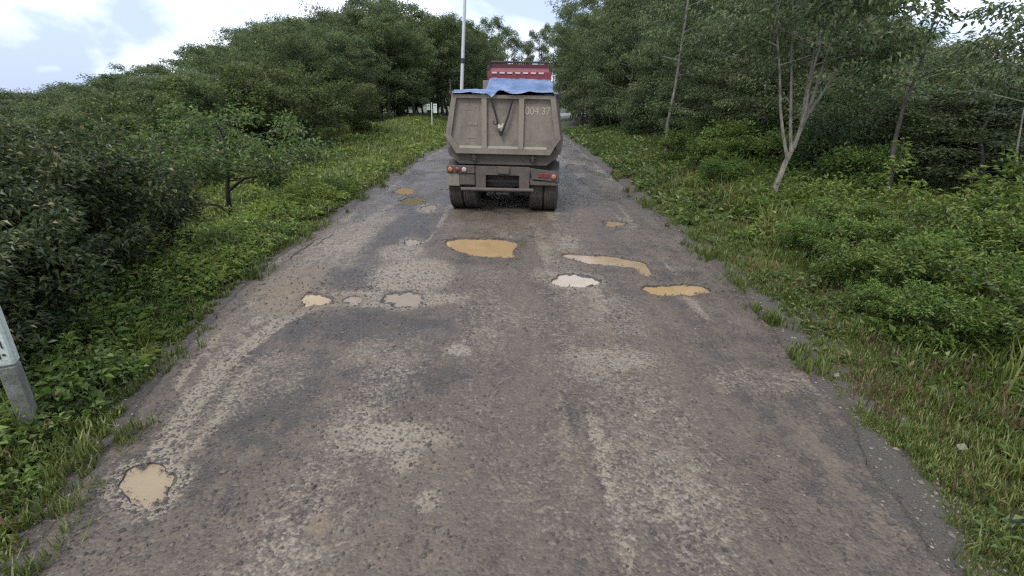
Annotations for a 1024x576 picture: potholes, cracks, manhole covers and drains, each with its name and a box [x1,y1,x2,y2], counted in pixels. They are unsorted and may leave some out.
pothole [379,290,425,308]
pothole [562,253,654,276]
pothole [301,293,334,307]
pothole [445,237,519,258]
pothole [341,296,363,305]
pothole [641,283,712,296]
crack [290,234,333,259]
pothole [117,462,178,509]
pothole [550,273,602,287]
